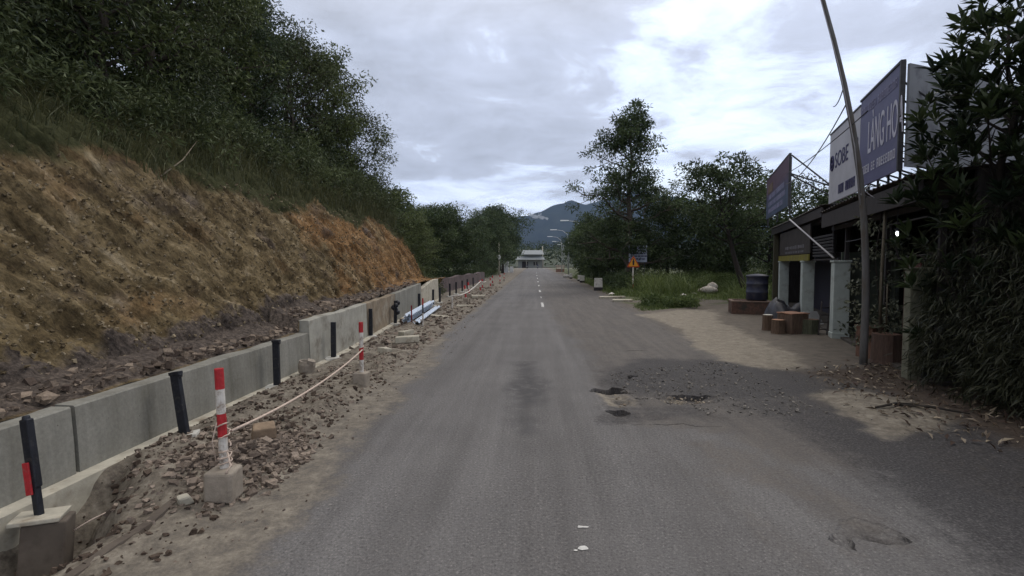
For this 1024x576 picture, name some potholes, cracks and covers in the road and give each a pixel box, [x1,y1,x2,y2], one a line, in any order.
pothole [605,410,631,419]
pothole [828,517,912,551]
pothole [658,394,719,405]
pothole [589,387,645,408]
